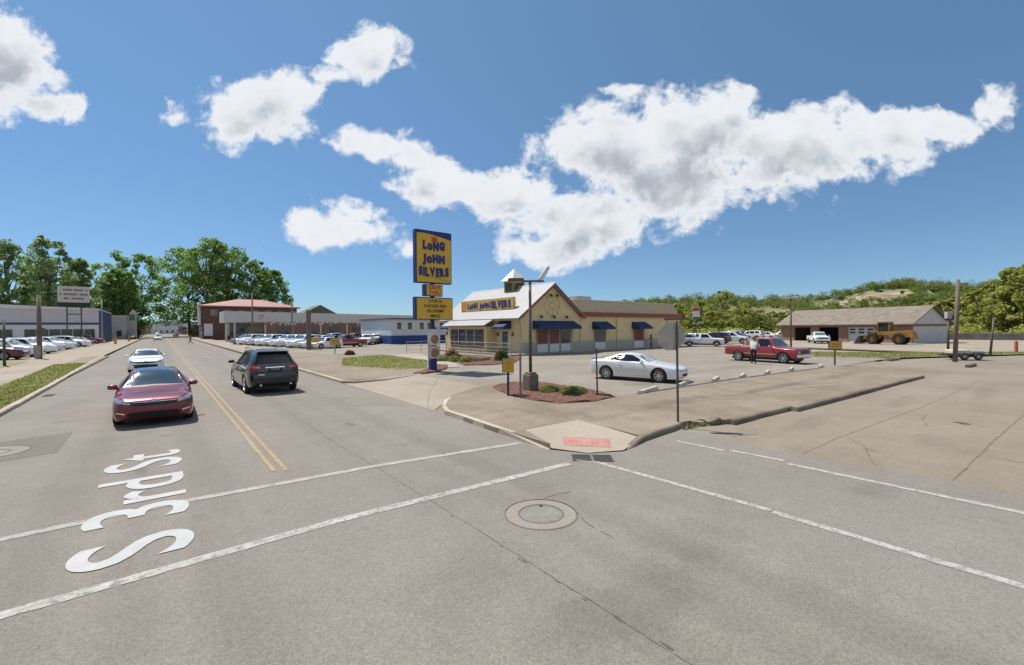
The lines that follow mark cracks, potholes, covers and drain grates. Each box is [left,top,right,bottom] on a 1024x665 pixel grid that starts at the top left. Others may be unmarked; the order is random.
manhole cover [504,499,578,530]
